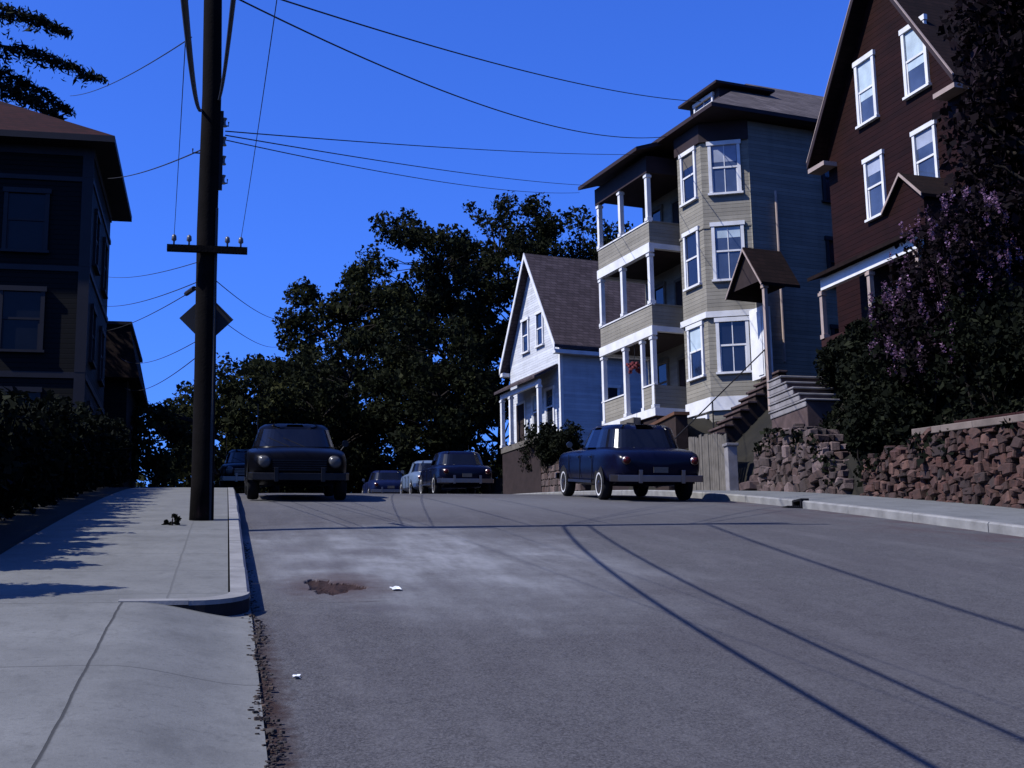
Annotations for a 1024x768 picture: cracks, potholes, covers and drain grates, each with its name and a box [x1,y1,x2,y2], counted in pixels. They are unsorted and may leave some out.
pothole [290,571,390,603]
